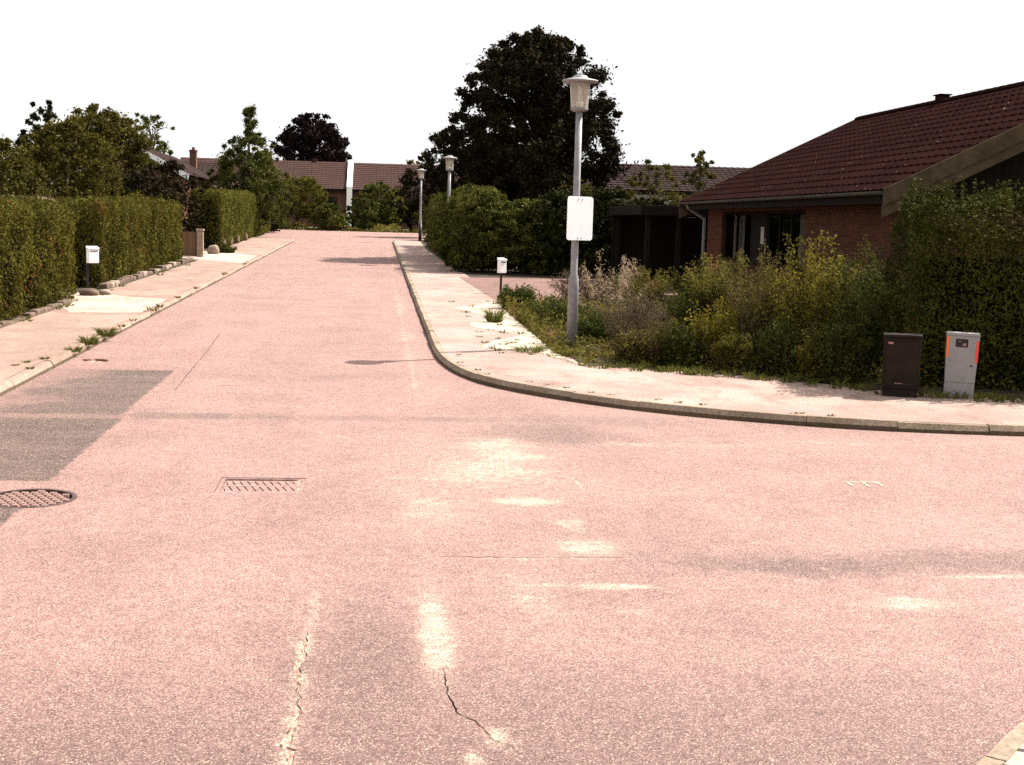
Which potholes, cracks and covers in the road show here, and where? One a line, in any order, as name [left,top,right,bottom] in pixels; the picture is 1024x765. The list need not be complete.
crack [443,666,501,743]
manhole cover [0,488,77,508]
crack [279,632,308,765]
drain grate [215,478,306,493]
